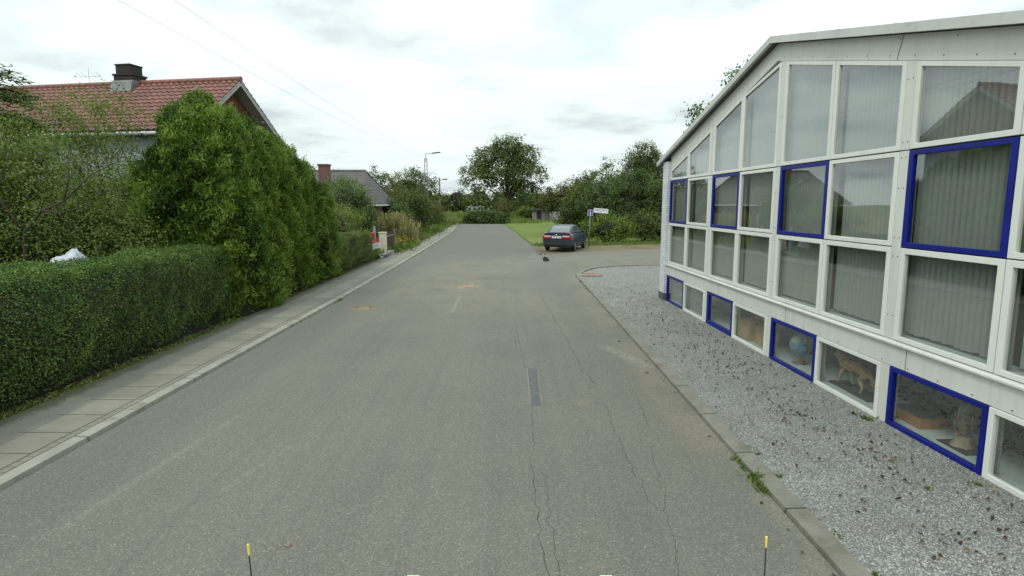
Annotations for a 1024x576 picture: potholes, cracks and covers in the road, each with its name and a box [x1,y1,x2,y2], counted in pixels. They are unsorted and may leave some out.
crack [543,300,679,573]
